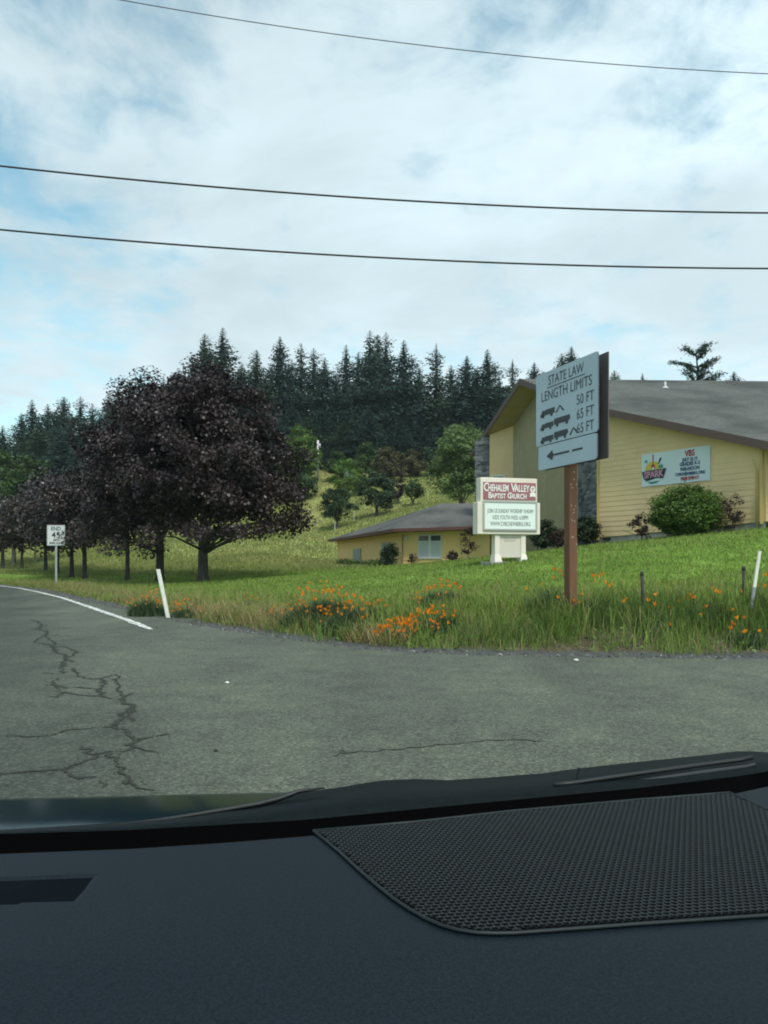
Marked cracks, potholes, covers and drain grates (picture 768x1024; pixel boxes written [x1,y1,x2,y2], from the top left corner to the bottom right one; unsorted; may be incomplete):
crack [0,619,166,791]
crack [329,739,546,756]
